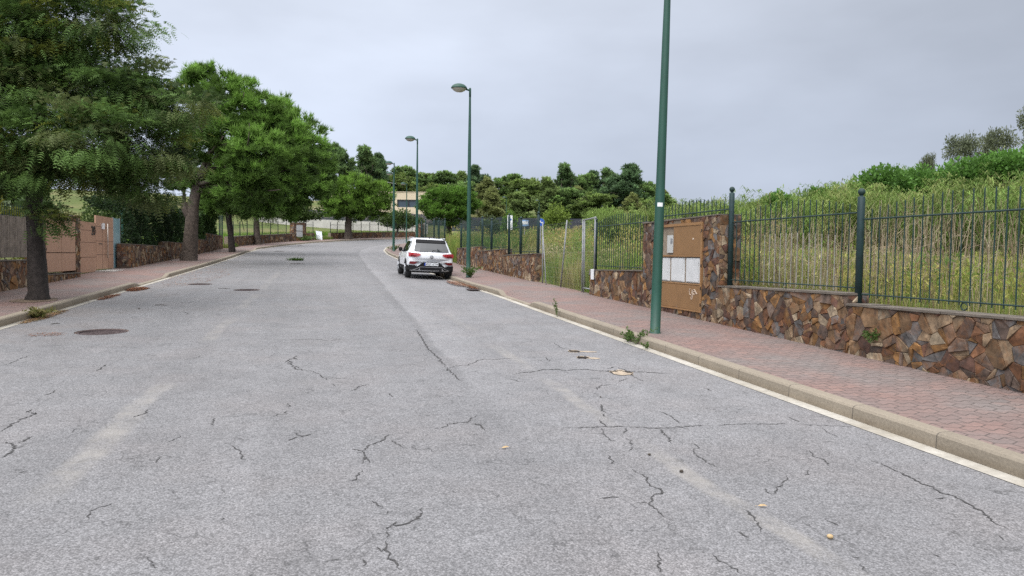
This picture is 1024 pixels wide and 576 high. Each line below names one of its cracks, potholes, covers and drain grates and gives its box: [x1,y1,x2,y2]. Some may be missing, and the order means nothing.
crack [871,460,1008,542]
crack [0,390,55,472]
crack [350,435,432,481]
crack [634,470,670,520]
crack [418,332,836,466]
